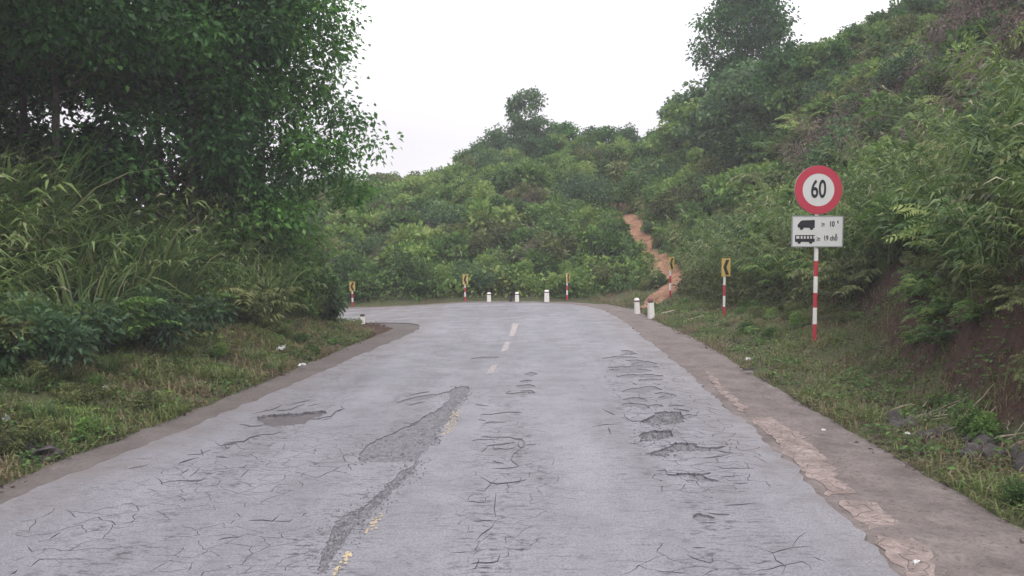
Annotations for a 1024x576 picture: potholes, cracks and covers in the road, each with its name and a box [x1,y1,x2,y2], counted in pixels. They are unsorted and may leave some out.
crack [397,372,565,569]
pothole [257,410,327,427]
crack [11,400,362,575]
pothole [317,460,419,575]
pothole [642,411,684,426]
pothole [639,430,673,442]
pothole [650,442,728,457]
crack [592,350,929,576]
pothole [358,386,470,463]
